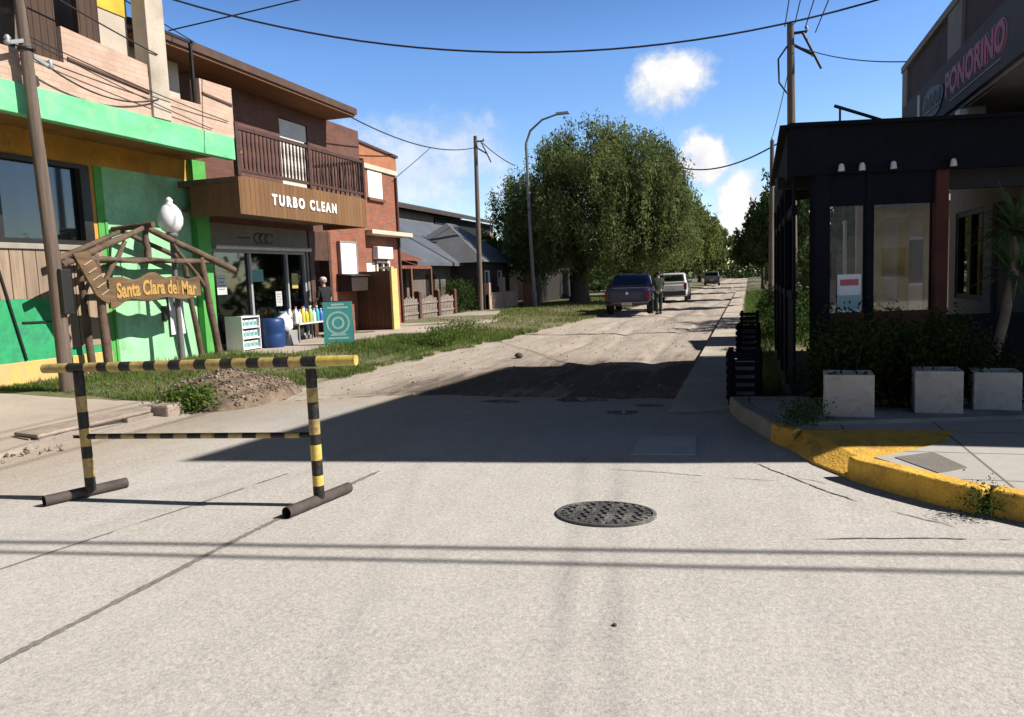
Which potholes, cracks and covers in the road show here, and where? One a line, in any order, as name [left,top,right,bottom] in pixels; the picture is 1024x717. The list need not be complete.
manhole cover [556,501,657,528]
crack [818,511,1006,540]
crack [618,463,856,501]
